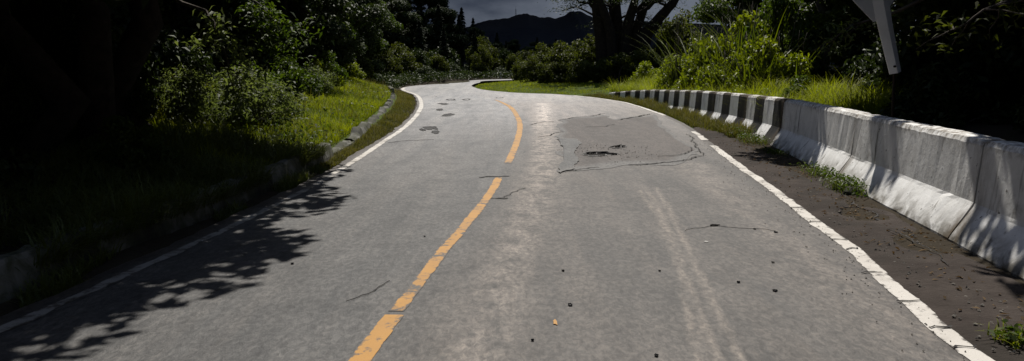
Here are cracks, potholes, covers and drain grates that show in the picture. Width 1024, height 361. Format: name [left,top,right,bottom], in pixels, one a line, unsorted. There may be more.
crack [629,135,704,165]
crack [531,113,648,137]
